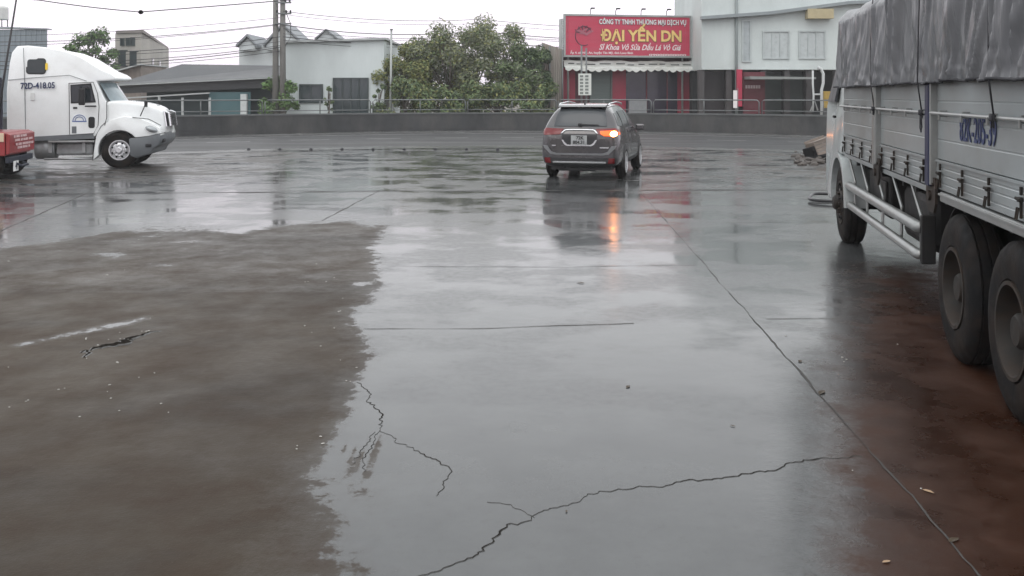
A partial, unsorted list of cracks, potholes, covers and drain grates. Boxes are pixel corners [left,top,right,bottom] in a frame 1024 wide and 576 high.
crack [79,330,161,357]
crack [353,382,452,496]
crack [419,455,862,576]
